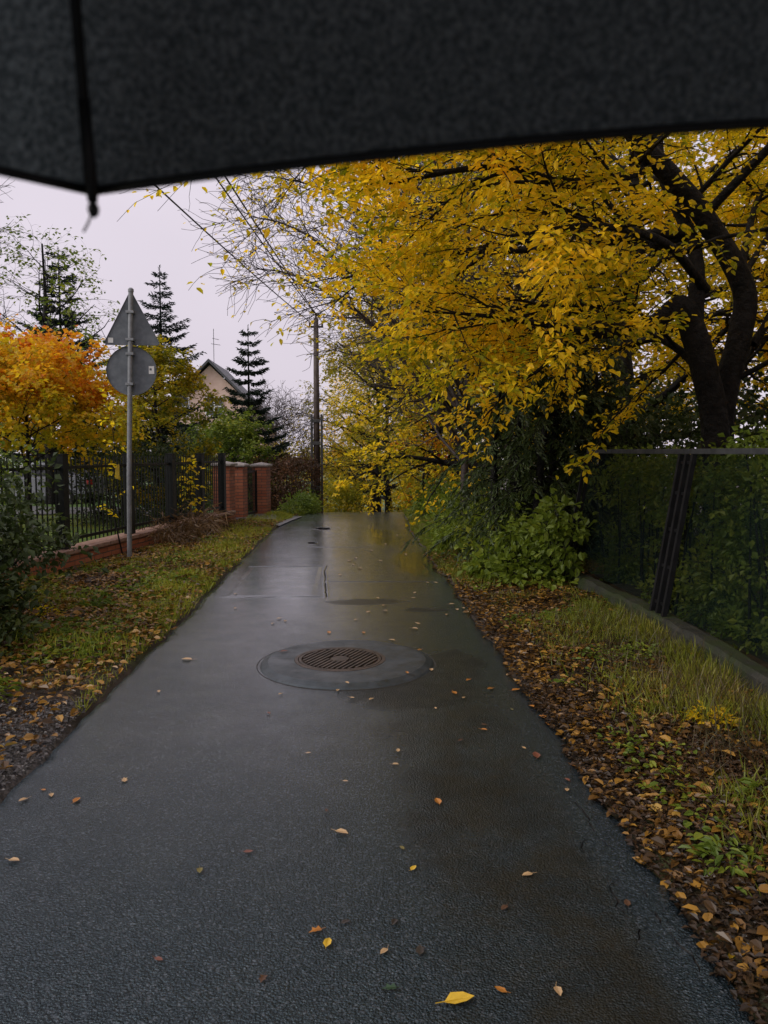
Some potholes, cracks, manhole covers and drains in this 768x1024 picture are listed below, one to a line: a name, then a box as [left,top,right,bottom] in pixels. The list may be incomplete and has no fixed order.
manhole cover [256,640,436,691]
